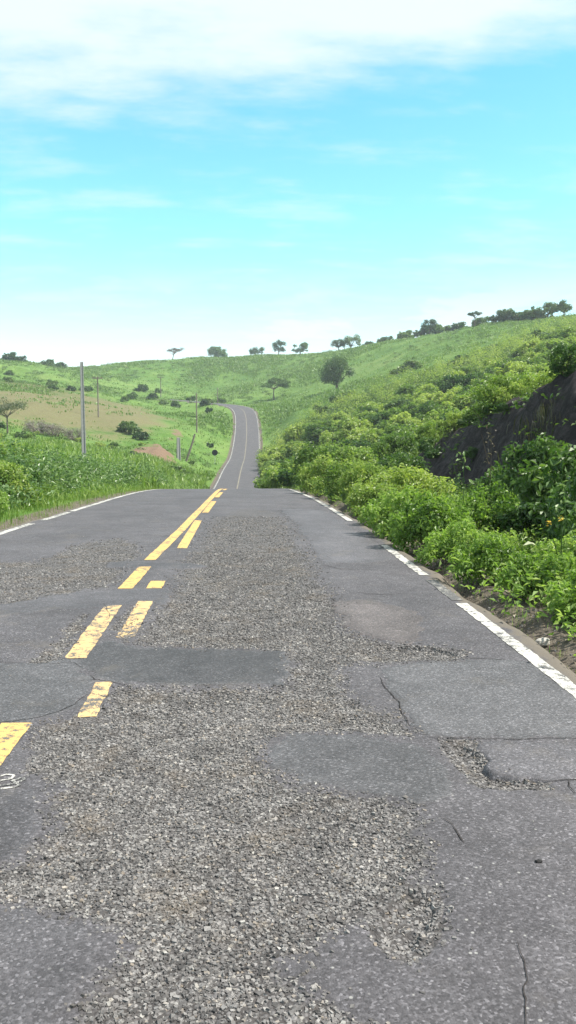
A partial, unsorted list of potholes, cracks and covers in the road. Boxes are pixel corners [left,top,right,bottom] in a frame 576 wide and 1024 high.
crack [4,662,129,722]
pothole [443,741,545,791]
pothole [352,645,468,662]
crack [378,675,560,739]
pothole [373,883,444,959]
crack [515,933,528,1024]
